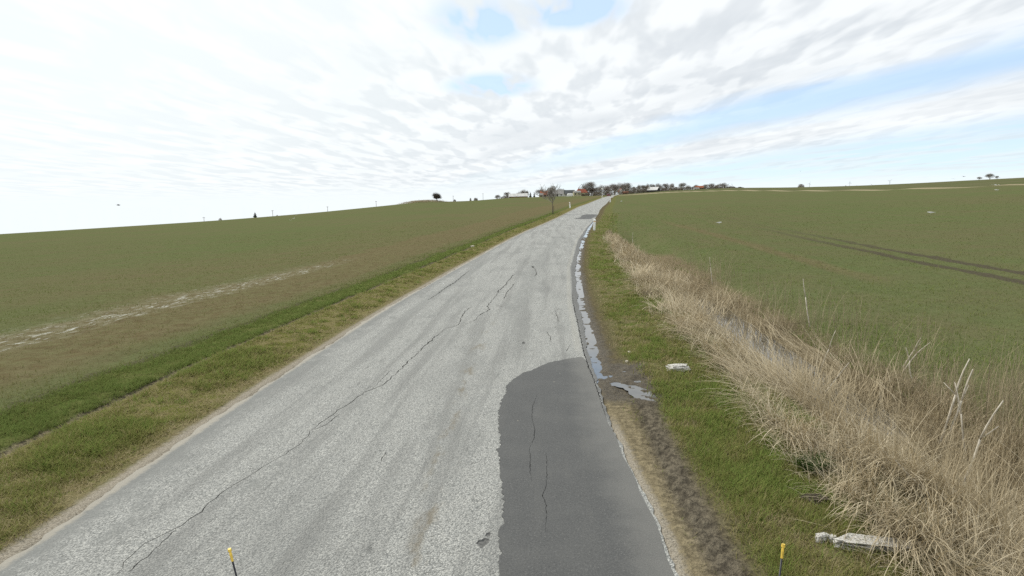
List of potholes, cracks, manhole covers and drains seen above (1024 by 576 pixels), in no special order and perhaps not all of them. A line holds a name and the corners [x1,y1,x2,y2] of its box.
crack [123,274,514,571]
